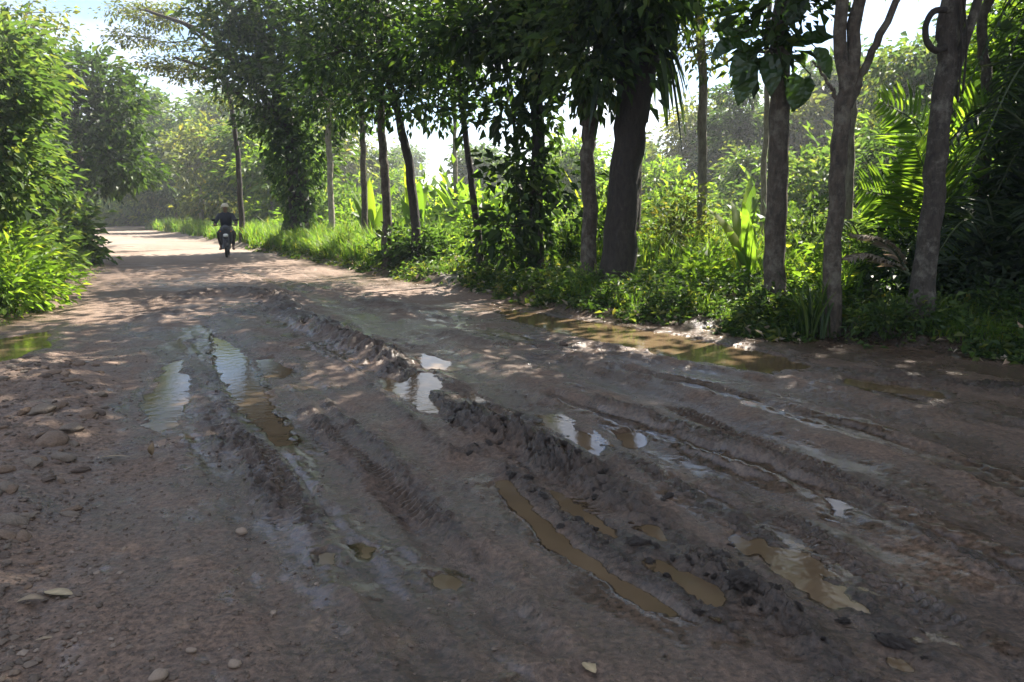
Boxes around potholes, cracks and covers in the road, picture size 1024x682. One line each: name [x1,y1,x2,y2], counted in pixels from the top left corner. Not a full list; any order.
pothole [408,351,462,372]
pothole [372,368,456,418]
pothole [531,414,619,462]
pothole [627,512,691,547]
pothole [258,353,303,379]
pothole [691,502,966,662]
pothole [128,356,201,435]
pothole [604,425,662,453]
